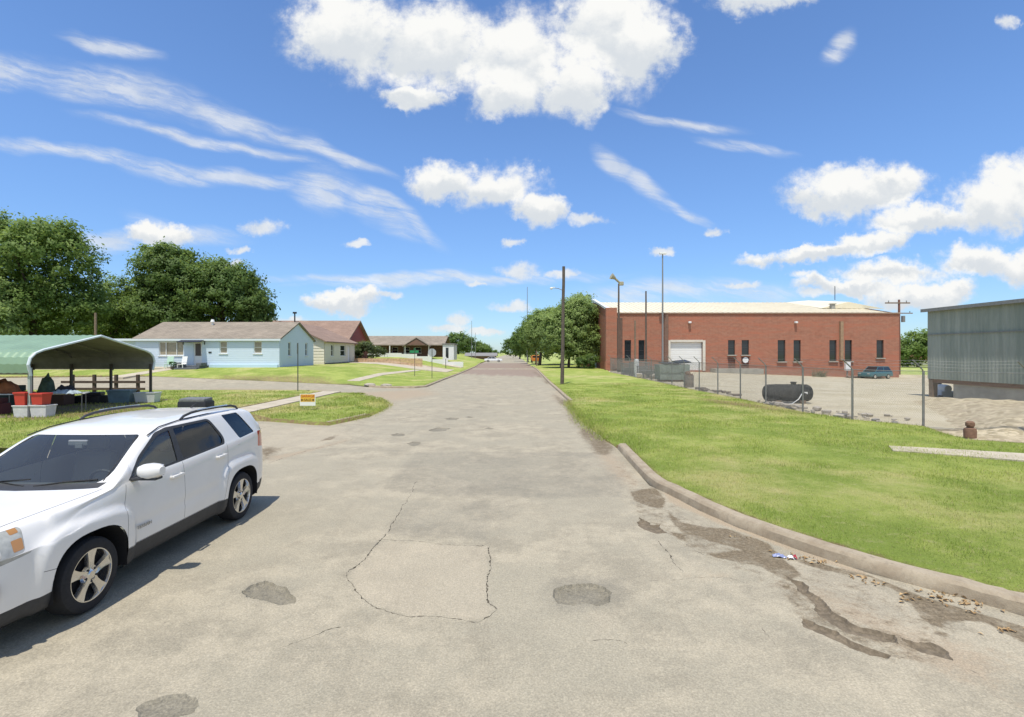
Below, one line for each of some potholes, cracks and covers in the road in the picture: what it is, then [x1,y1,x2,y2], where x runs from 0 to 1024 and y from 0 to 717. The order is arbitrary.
pothole [242,581,296,605]
pothole [553,583,612,606]
pothole [135,693,199,717]
crack [346,482,497,623]
